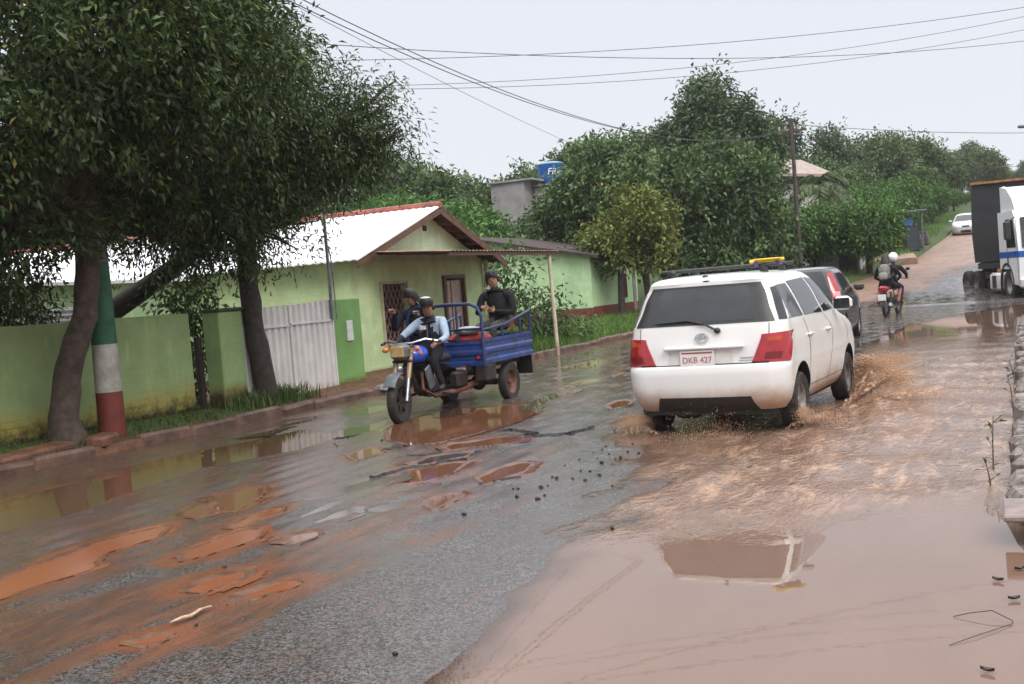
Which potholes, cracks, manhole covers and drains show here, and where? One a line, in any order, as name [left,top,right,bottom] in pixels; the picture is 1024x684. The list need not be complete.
pothole [344,446,391,461]
pothole [420,491,471,512]
pothole [270,529,327,548]
pothole [221,506,287,529]
pothole [225,577,306,605]
pothole [178,564,270,595]
crack [497,425,595,437]
pothole [171,504,222,520]
pothole [0,523,180,600]
crack [369,445,521,484]
pothole [205,486,276,514]
pothole [395,461,476,485]
